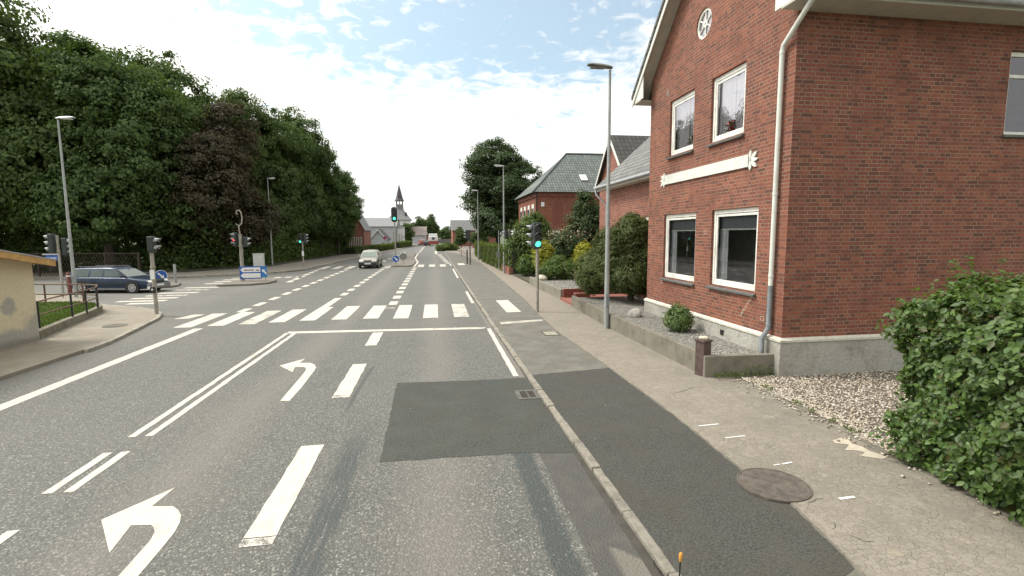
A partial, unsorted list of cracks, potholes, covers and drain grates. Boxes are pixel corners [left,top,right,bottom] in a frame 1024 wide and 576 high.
manhole cover [736,468,813,504]
drain grate [514,389,541,400]
